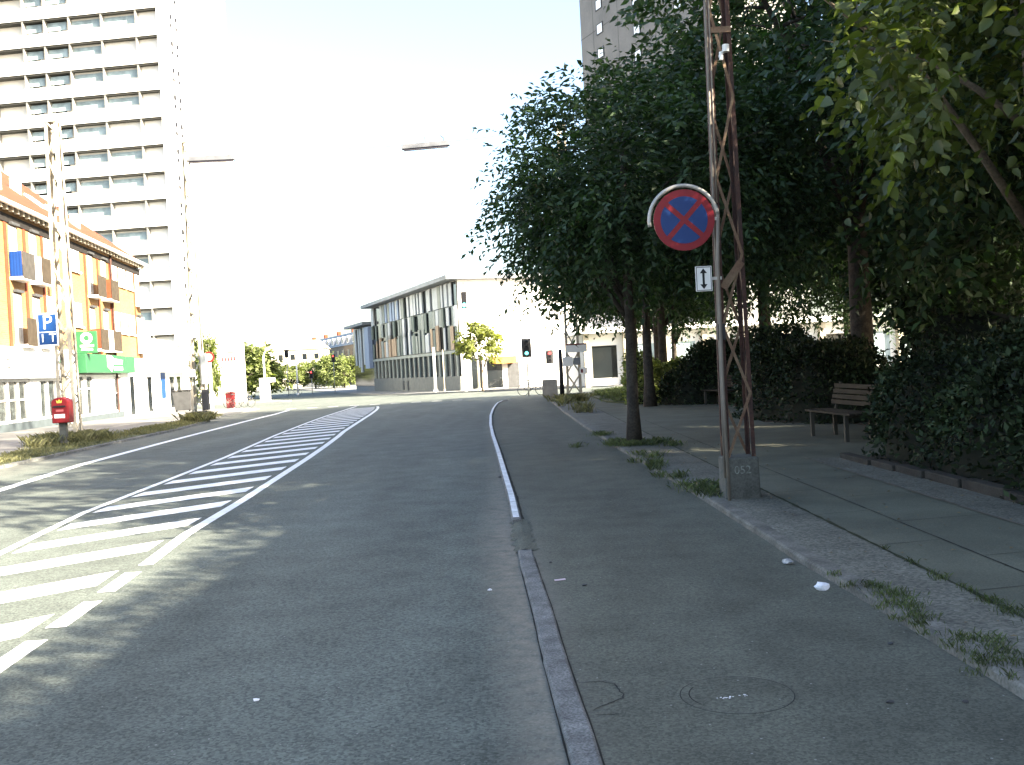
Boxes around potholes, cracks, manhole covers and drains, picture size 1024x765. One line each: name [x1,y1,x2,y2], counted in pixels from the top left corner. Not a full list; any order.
crack [580,681,624,710]
manhole cover [676,676,799,716]
